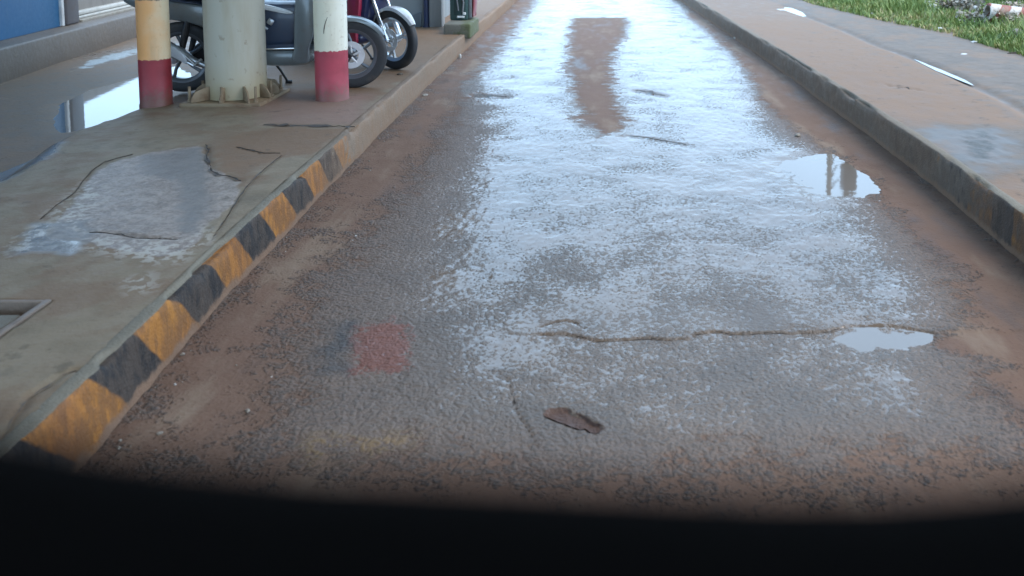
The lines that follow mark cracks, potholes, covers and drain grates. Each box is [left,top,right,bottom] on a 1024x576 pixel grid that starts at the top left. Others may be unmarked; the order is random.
manhole cover [0,299,52,337]
crack [205,144,274,181]
crack [543,322,882,342]
